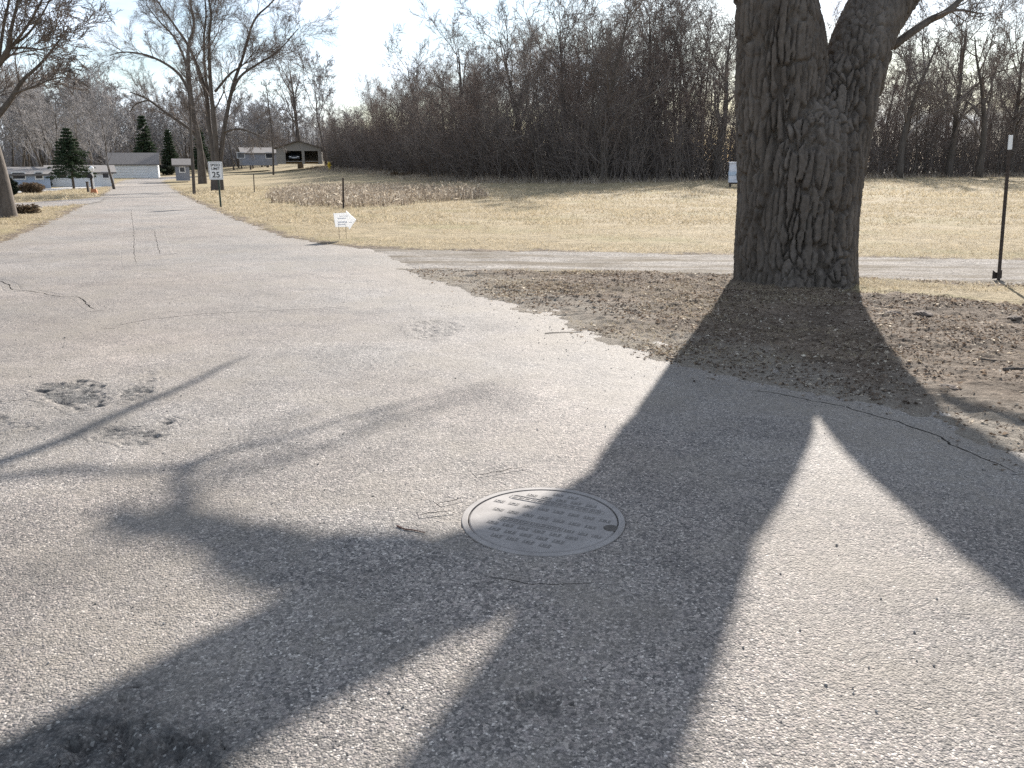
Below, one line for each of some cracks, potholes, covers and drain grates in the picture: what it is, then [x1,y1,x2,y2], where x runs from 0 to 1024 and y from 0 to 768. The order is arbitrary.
pothole [19,378,126,416]
manhole cover [461,487,625,557]
crack [747,388,1024,475]
pothole [74,414,183,450]
crack [483,572,598,590]
